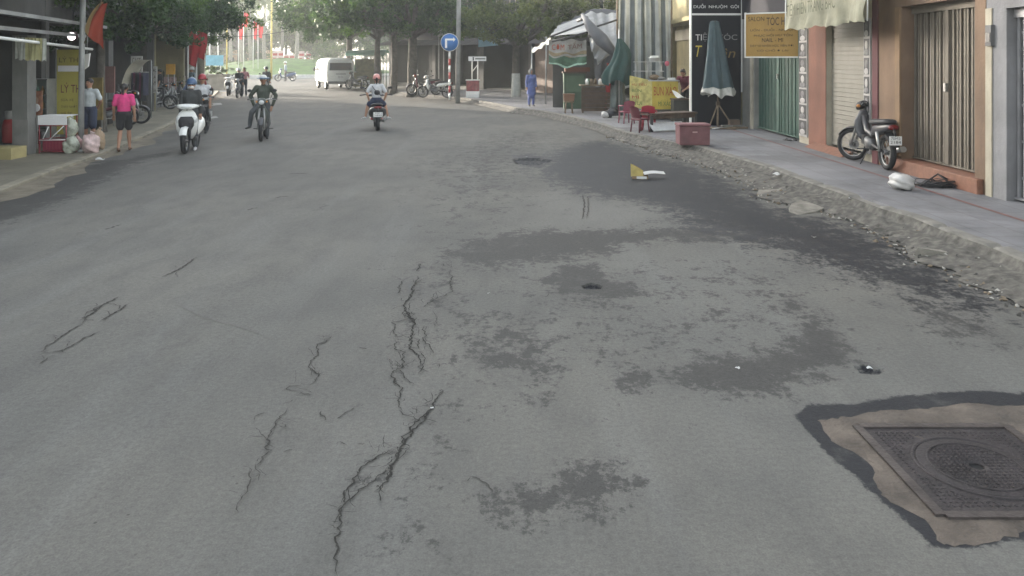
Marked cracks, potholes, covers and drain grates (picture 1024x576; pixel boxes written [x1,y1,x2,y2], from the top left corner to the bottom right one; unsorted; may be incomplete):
crack [228,334,353,511]
pothole [500,155,563,168]
crack [331,253,460,574]
